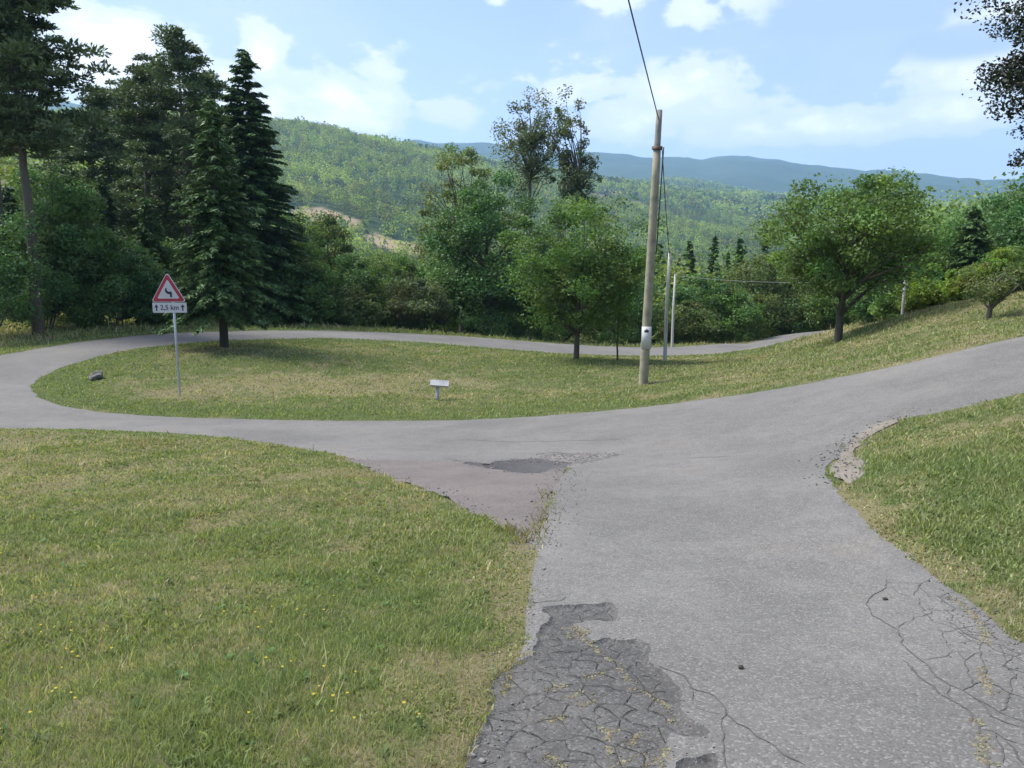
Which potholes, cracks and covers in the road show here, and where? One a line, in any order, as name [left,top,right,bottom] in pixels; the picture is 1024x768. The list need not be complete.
crack [865,577,1024,768]
crack [468,605,806,768]
